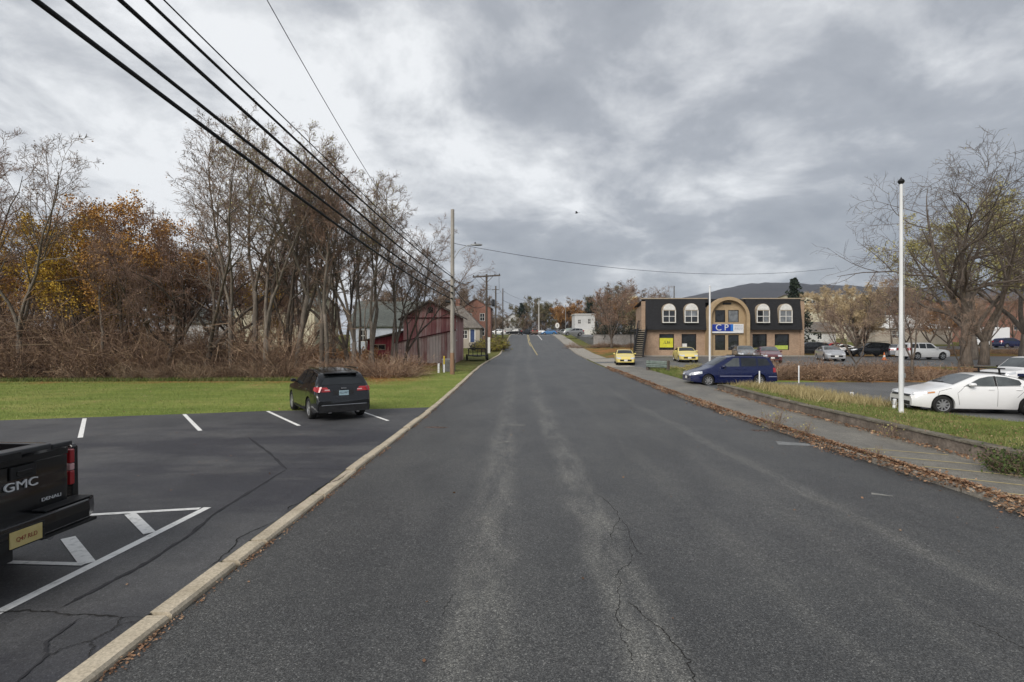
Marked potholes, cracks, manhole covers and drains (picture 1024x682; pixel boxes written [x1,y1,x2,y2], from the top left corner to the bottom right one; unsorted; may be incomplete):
crack [603,498,696,682]
crack [1,609,142,682]
